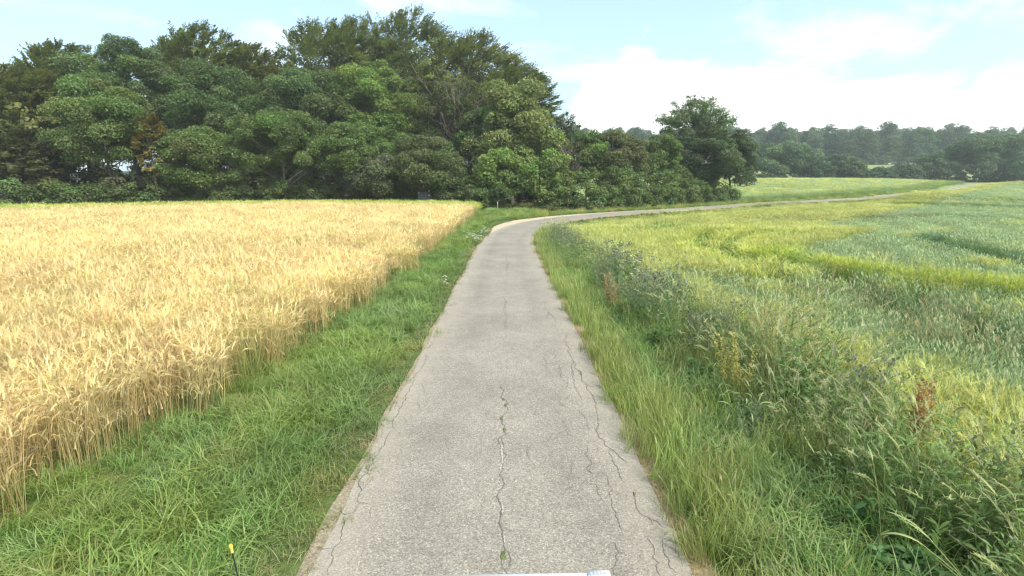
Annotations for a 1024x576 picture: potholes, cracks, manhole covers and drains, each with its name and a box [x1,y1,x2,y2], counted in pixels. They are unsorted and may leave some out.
crack [496,363,511,573]
crack [544,302,676,575]
crack [322,328,449,576]
